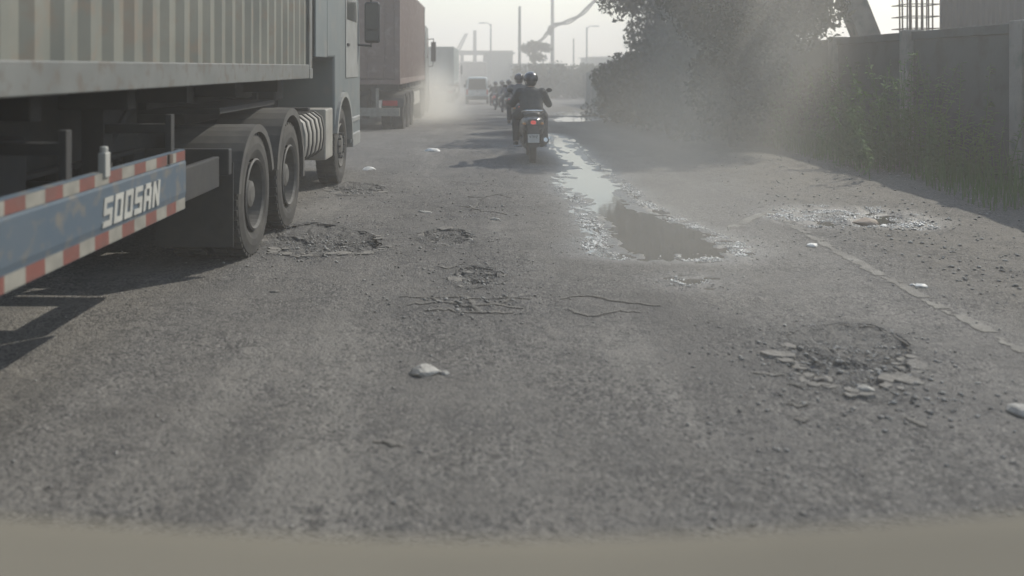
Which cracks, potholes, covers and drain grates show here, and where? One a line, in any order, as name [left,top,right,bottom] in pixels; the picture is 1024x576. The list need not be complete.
pothole [757,320,937,404]
pothole [439,263,517,290]
pothole [261,221,392,259]
crack [399,264,530,314]
pothole [407,226,484,249]
pothole [319,181,393,196]
crack [559,295,661,316]
